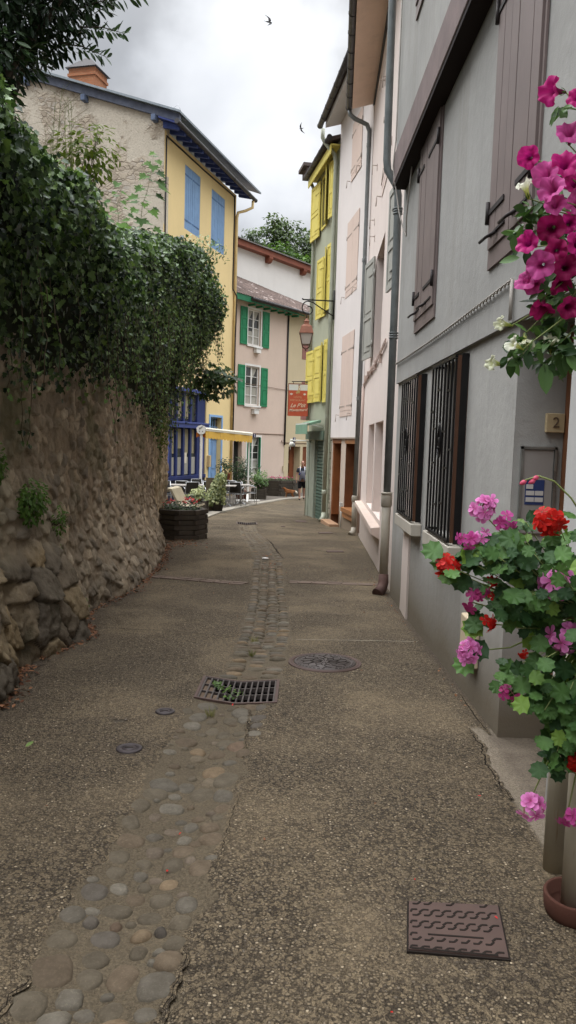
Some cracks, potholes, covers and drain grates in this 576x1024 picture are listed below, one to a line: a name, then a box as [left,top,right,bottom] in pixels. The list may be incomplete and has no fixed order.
crack [458,693,514,800]
crack [157,946,190,1024]
crack [266,538,284,558]
crack [0,975,32,1017]
manhole cover [406,901,511,962]
drain grate [193,675,280,705]
manhole cover [288,653,361,673]
utility cover [116,743,142,754]
